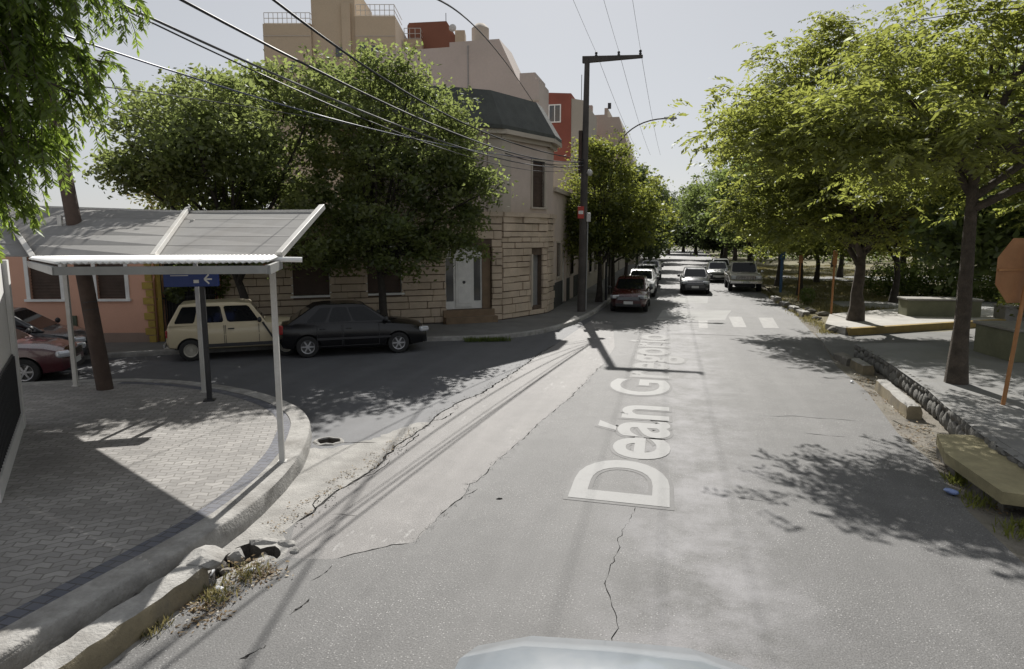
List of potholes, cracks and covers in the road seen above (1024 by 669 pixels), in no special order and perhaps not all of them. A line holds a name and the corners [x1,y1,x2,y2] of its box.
pothole [208,543,281,581]
crack [604,509,635,640]
crack [295,345,555,523]
